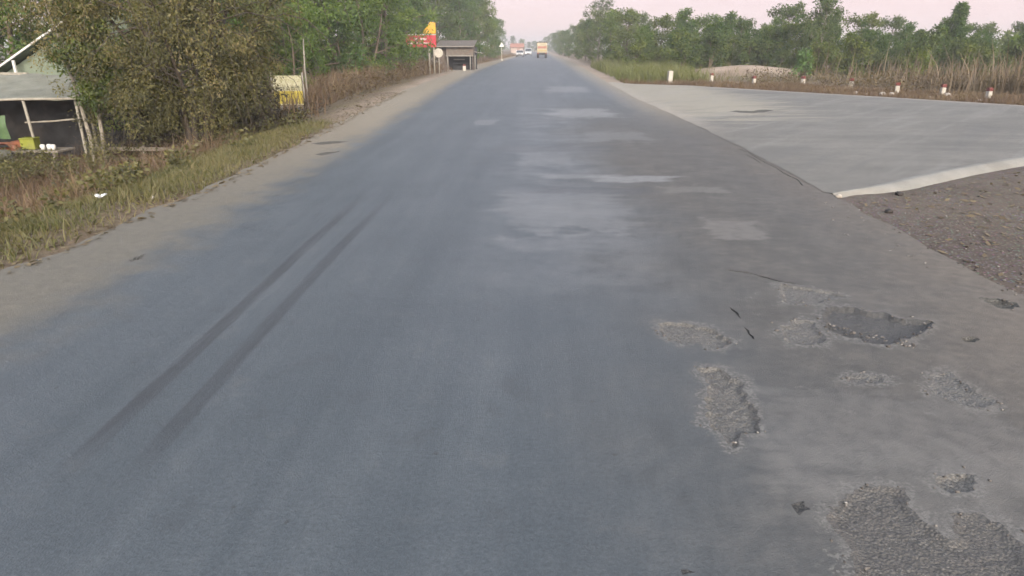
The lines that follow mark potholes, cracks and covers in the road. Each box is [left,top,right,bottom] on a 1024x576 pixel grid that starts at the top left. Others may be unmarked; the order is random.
pothole [696,367,761,450]
pothole [926,372,996,409]
pothole [826,485,1024,576]
pothole [820,306,934,344]
pothole [780,320,827,345]
pothole [844,375,887,384]
pothole [658,322,732,348]
pothole [935,474,978,494]
crack [729,270,802,285]
pothole [979,297,1021,309]
